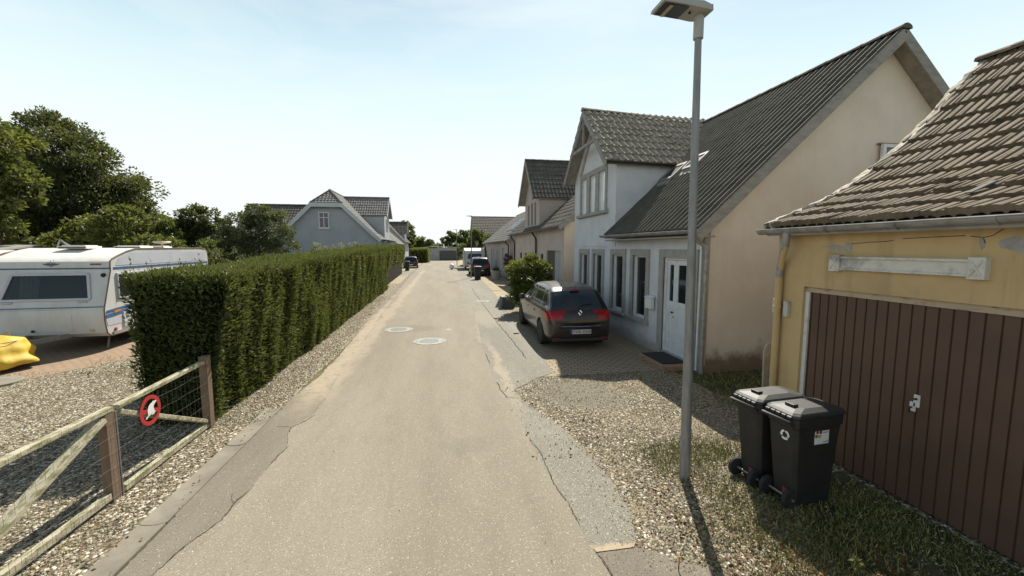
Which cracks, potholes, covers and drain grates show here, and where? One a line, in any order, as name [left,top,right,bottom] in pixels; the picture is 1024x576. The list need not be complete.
manhole cover [413,337,446,345]
